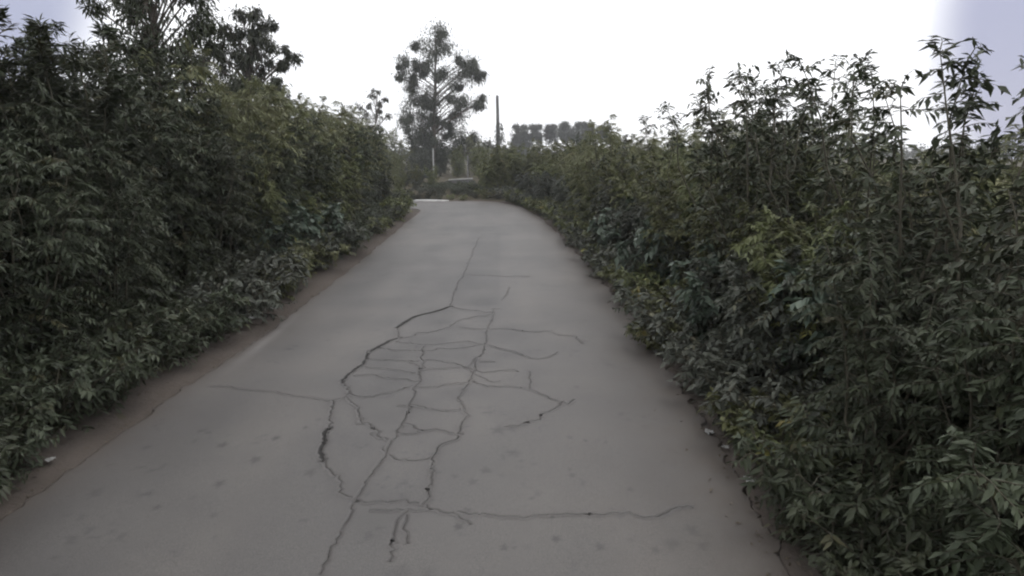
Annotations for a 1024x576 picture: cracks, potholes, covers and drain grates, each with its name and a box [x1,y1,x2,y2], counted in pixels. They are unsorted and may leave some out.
crack [209,238,694,575]
